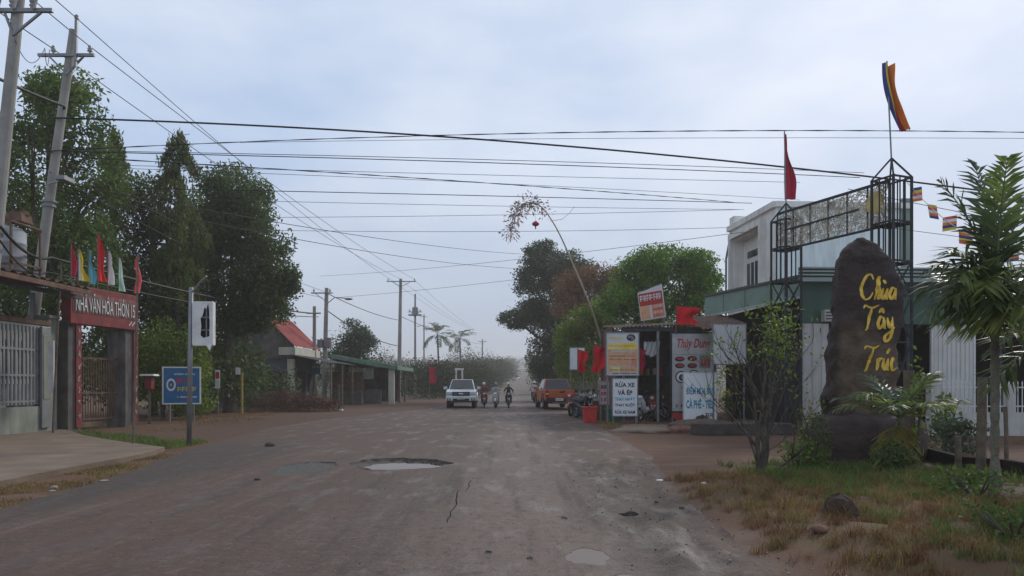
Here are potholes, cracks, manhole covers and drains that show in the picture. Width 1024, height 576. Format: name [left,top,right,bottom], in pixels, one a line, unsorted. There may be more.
crack [447,480,471,522]
pothole [348,458,454,470]
